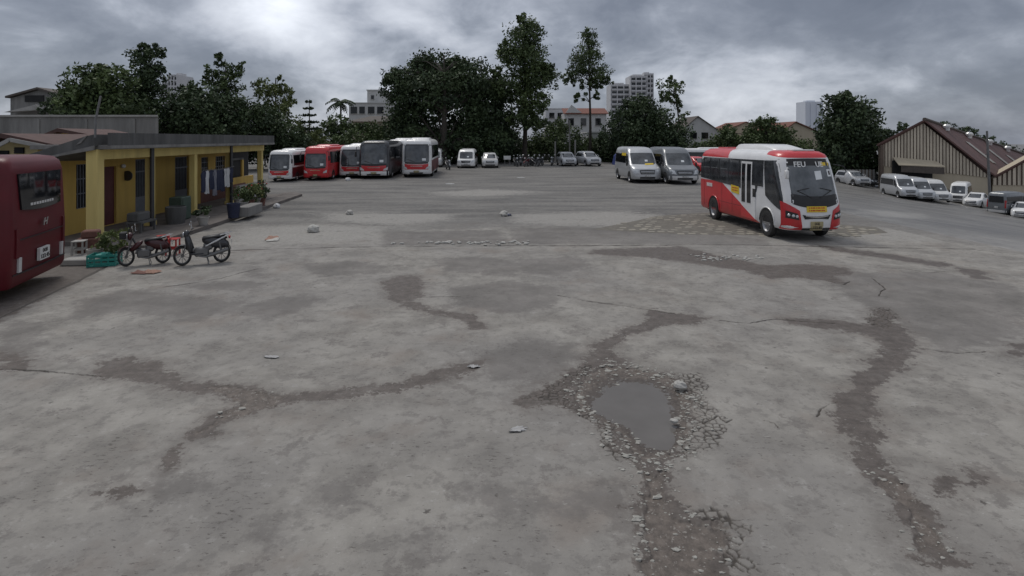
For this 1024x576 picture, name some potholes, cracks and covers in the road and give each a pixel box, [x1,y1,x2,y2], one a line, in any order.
crack [683,244,1004,358]
pothole [550,358,719,480]
crack [670,364,855,576]
